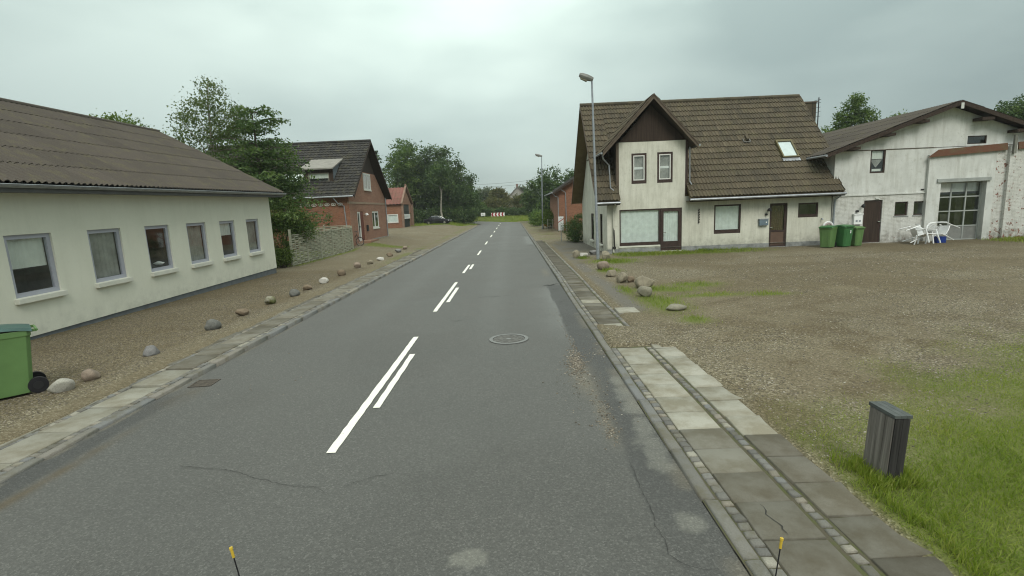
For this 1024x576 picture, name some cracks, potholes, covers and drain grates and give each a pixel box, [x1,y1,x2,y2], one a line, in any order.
manhole cover [489,334,528,344]
crack [183,466,393,491]
crack [630,463,720,570]
